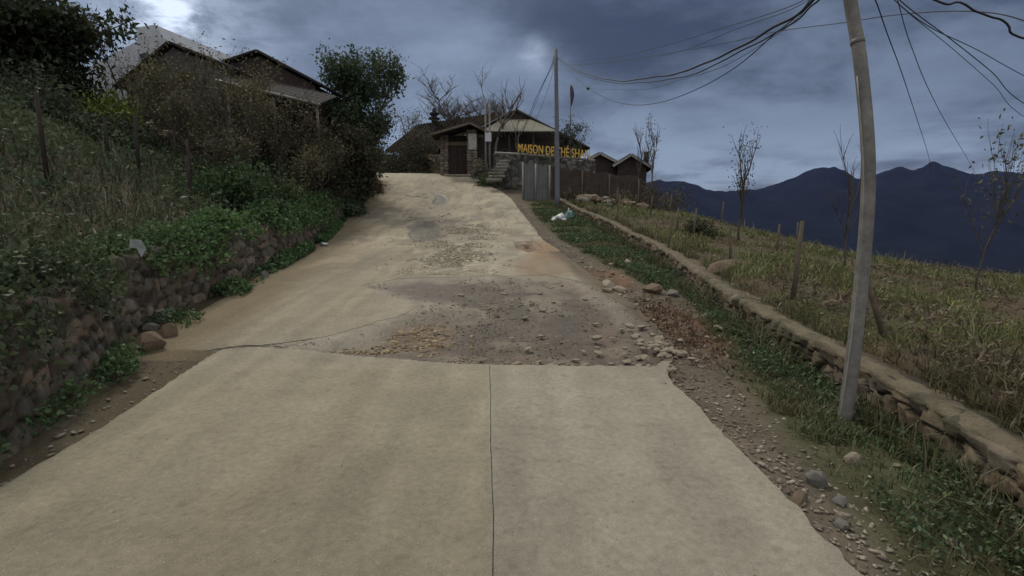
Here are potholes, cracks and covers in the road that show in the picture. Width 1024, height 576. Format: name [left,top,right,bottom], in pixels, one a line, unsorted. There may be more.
pothole [282,275,666,366]
crack [211,338,318,351]
